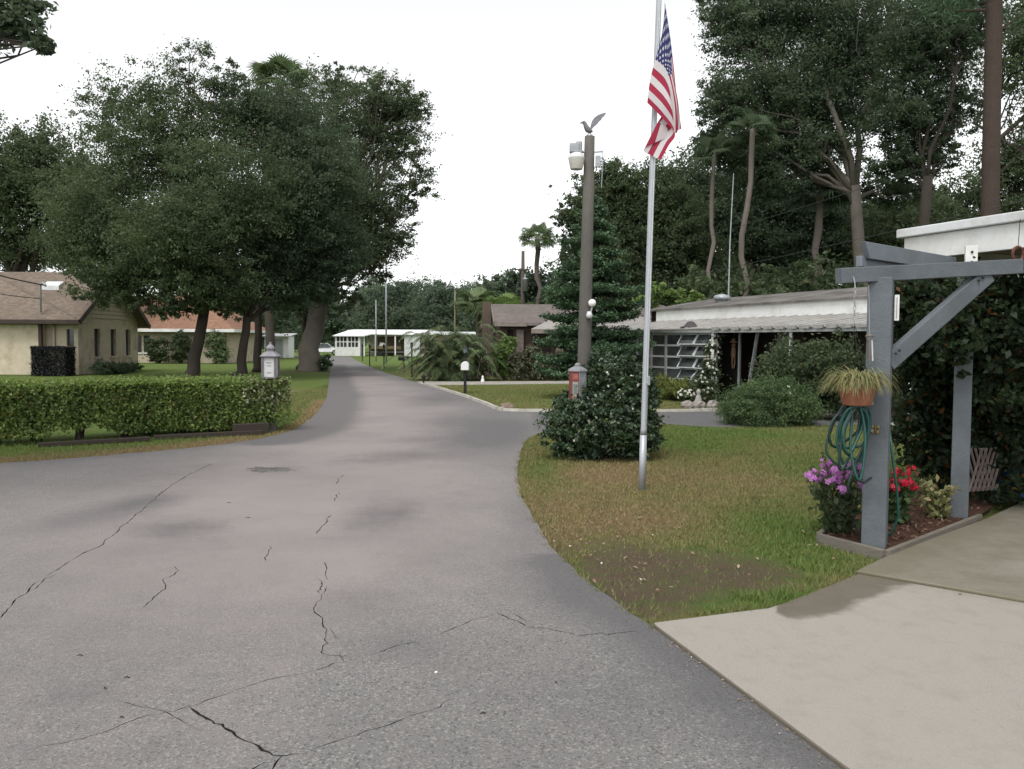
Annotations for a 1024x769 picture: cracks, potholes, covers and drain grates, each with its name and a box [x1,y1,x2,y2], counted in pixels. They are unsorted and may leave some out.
crack [36,563,494,769]
crack [0,464,211,618]
crack [498,613,644,636]
